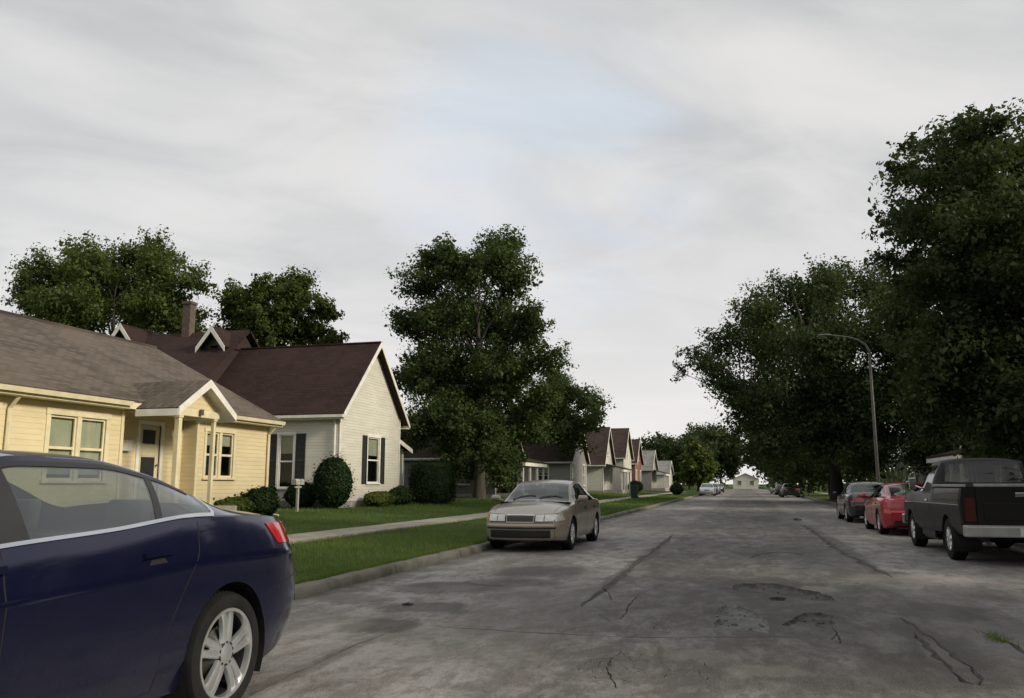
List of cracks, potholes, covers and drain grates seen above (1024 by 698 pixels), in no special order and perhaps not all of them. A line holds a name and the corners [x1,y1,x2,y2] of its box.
pothole [732,583,835,601]
pothole [782,612,835,629]
crack [421,535,796,689]
crack [899,617,1024,686]
crack [749,525,893,578]
